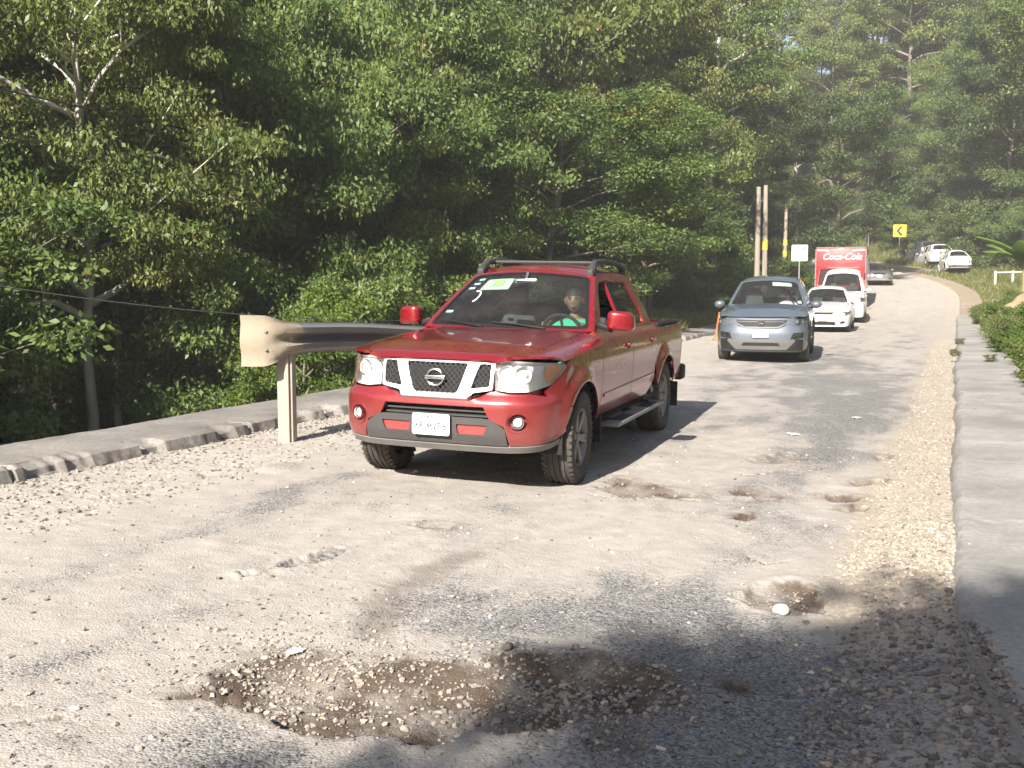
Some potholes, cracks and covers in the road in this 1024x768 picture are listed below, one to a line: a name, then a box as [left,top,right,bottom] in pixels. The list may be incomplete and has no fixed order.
pothole [410,521,459,530]
pothole [730,513,756,521]
pothole [604,477,636,490]
pothole [278,547,347,568]
pothole [849,478,890,487]
pothole [162,650,685,746]
pothole [815,493,864,503]
pothole [728,486,765,497]
pothole [739,452,825,465]
pothole [730,577,829,616]
pothole [720,680,754,693]
